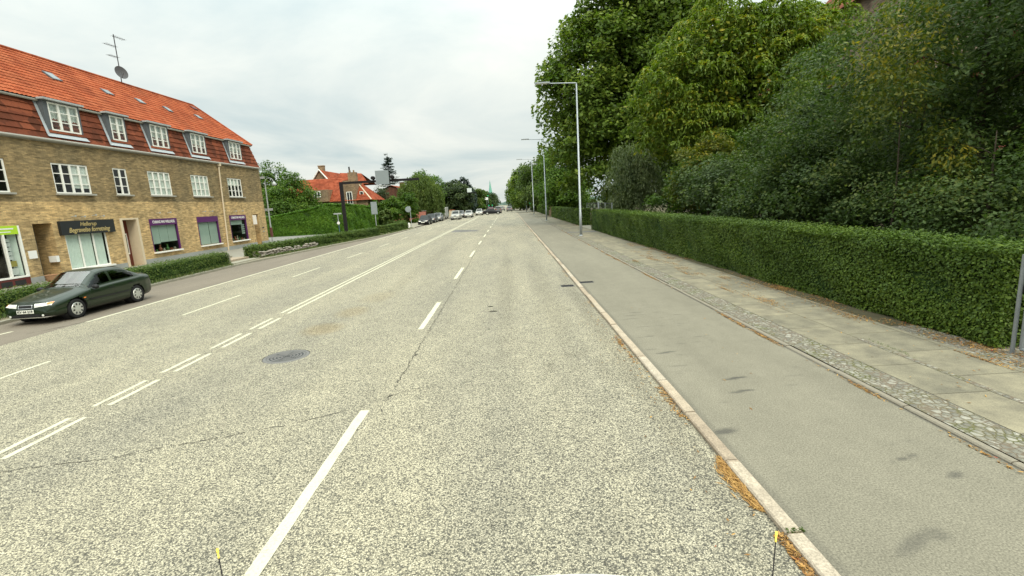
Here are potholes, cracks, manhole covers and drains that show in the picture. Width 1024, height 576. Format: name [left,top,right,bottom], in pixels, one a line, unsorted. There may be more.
manhole cover [250,348,319,366]
